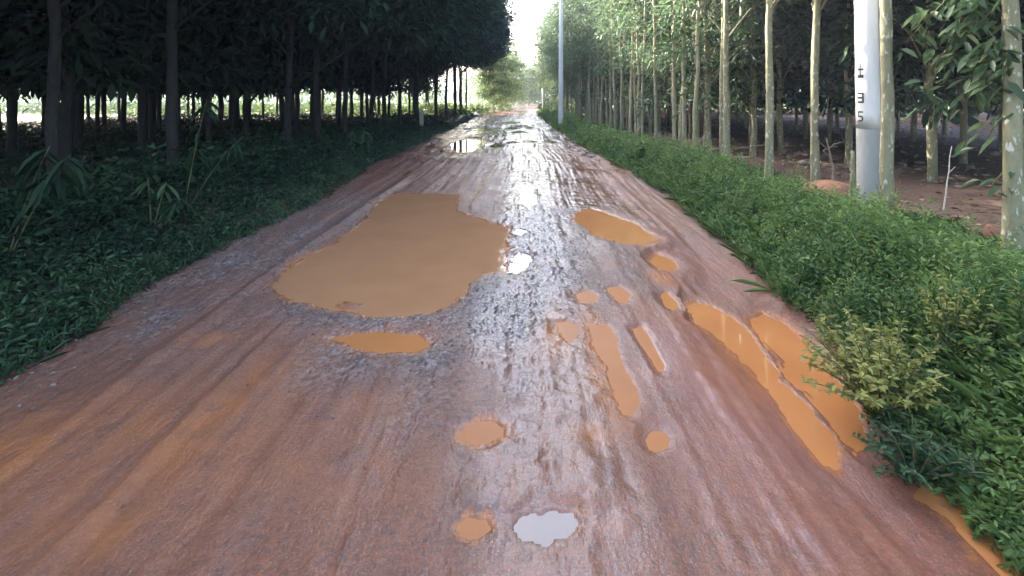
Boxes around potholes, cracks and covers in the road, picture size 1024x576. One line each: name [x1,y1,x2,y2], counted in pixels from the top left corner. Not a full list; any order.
pothole [508,502,584,554]
pothole [261,192,514,320]
pothole [646,252,681,271]
pothole [573,288,602,304]
pothole [640,425,675,456]
pothole [453,416,509,448]
pothole [449,139,485,153]
pothole [551,316,586,345]
pothole [602,285,634,306]
pothole [657,291,683,311]
pothole [321,326,441,356]
pothole [570,207,664,246]
